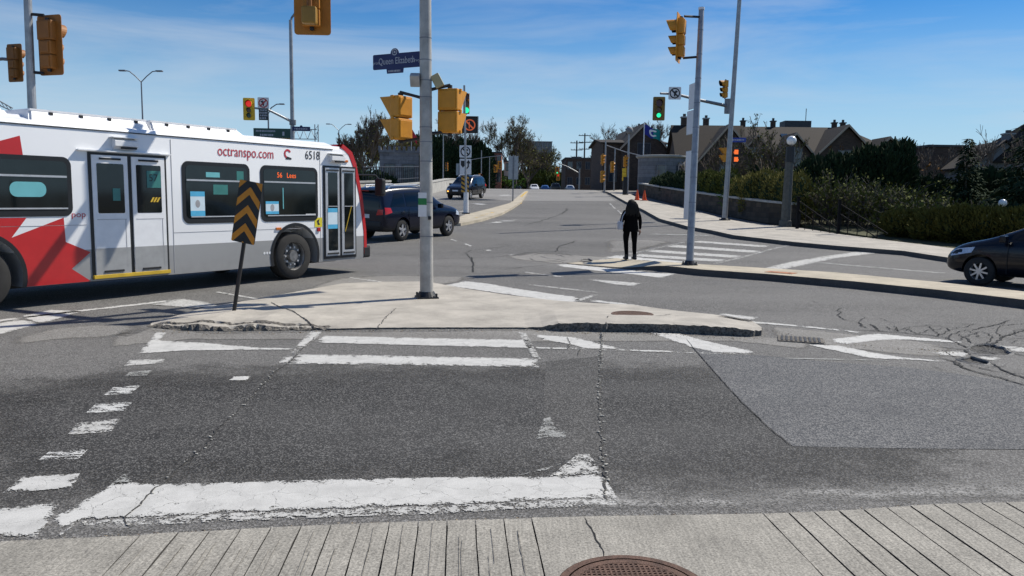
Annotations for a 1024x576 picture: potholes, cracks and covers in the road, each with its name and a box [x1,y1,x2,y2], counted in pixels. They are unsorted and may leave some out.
crack [814,301,1024,385]
drain grate [778,335,824,345]
crack [567,314,668,500]
manhole cover [561,555,697,576]
crack [585,518,604,556]
